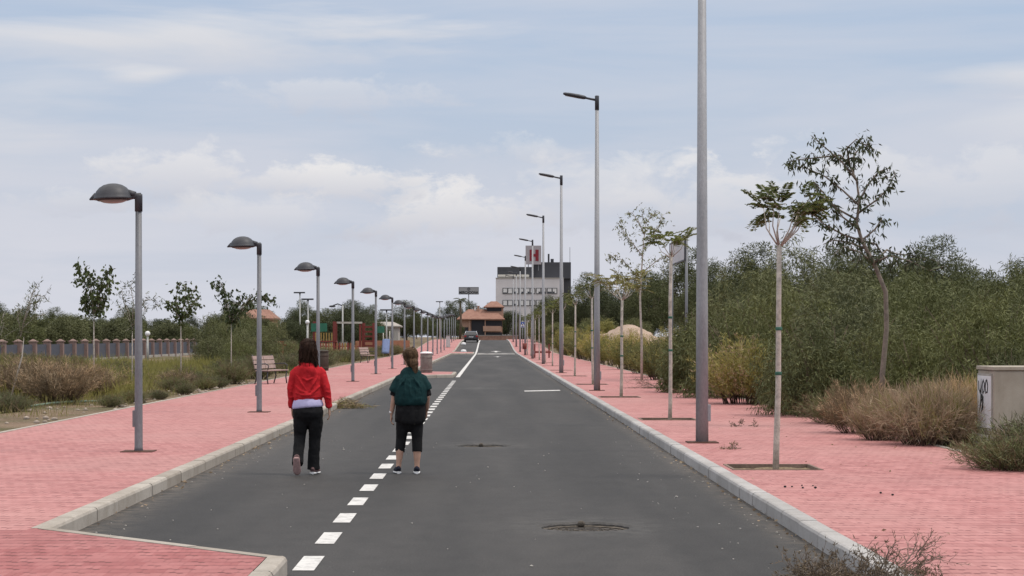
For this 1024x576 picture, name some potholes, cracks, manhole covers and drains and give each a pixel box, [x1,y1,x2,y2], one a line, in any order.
manhole cover [543,521,625,531]
